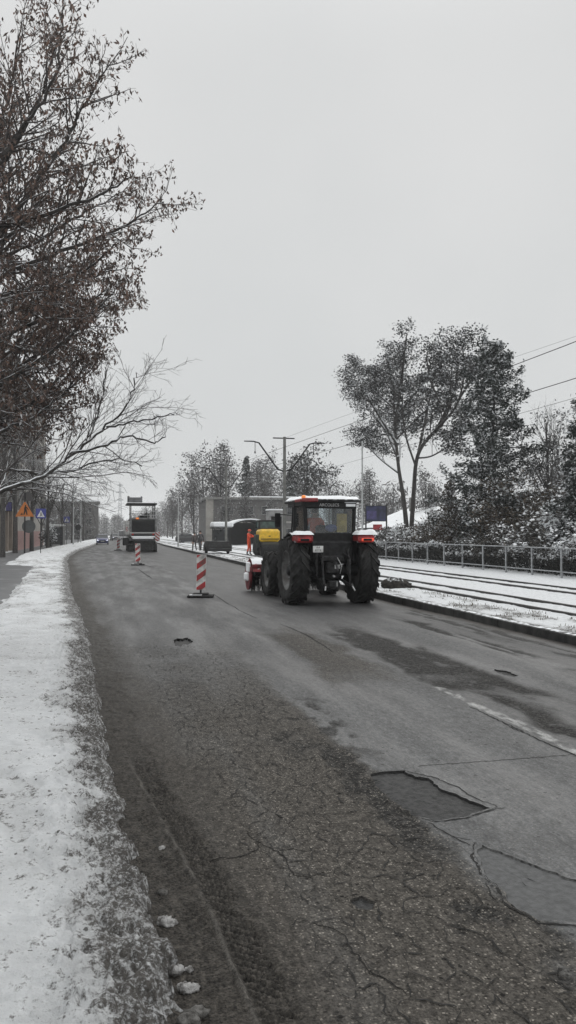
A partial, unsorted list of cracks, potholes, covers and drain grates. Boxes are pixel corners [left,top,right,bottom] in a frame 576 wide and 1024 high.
pothole [368,770,492,822]
pothole [473,844,576,925]
crack [140,645,576,1024]
pothole [172,638,194,647]
pothole [345,894,381,913]
pothole [493,669,520,677]
